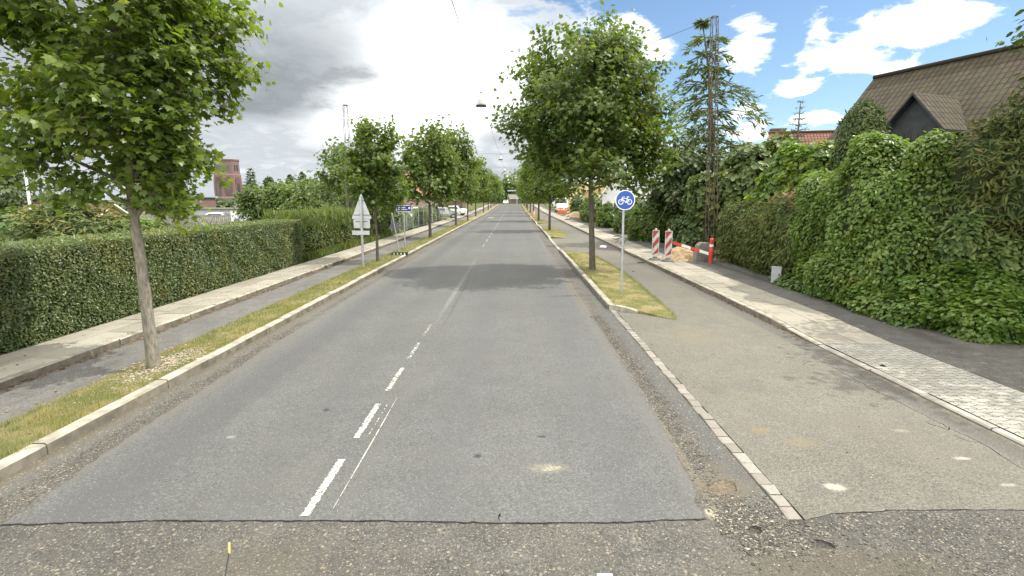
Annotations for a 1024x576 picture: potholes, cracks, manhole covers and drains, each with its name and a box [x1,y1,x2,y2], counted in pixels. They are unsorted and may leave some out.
pothole [812,539,835,549]
